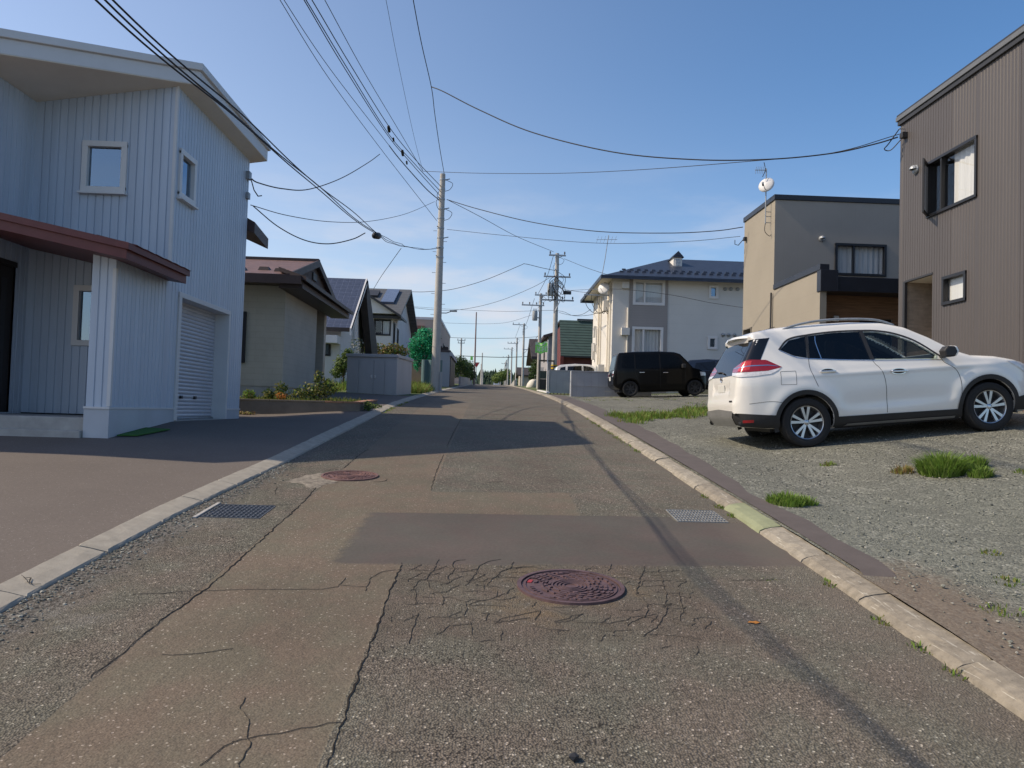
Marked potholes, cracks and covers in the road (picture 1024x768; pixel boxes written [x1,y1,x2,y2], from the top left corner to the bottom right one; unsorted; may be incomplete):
crack [200,697,338,767]
crack [390,559,724,655]
drain grate [666,509,729,523]
drain grate [200,504,276,519]
manhole cover [321,470,378,481]
crack [133,569,400,595]
manhole cover [517,569,625,606]
